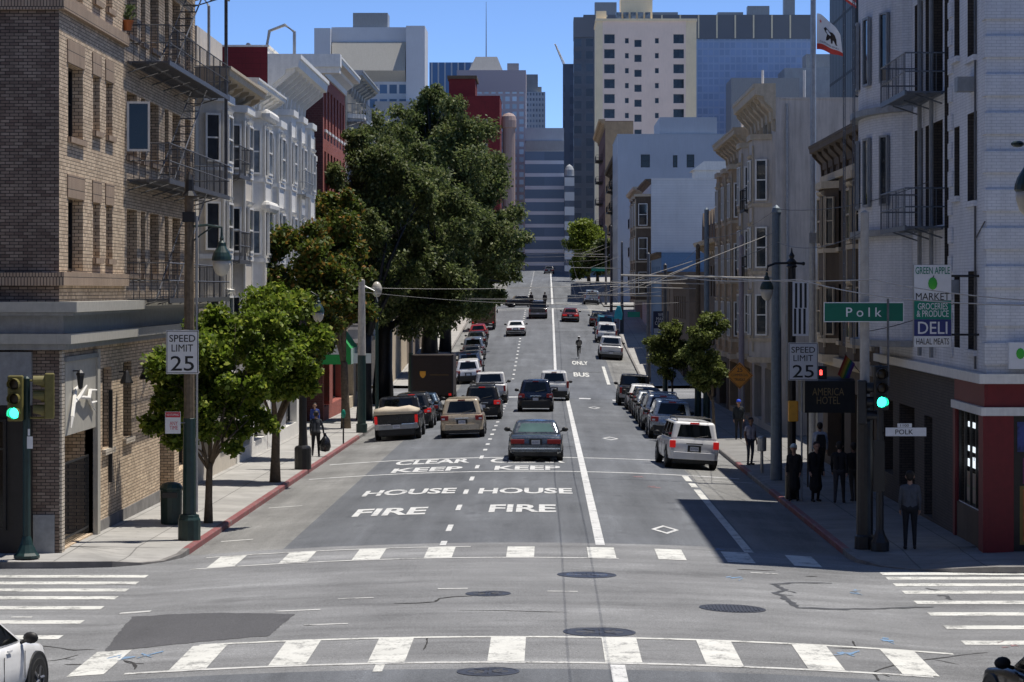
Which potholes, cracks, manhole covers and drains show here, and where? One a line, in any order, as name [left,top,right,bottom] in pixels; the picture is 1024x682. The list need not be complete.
crack [394,596,464,604]
manhole cover [563,627,636,637]
manhole cover [699,604,766,613]
manhole cover [457,667,520,676]
